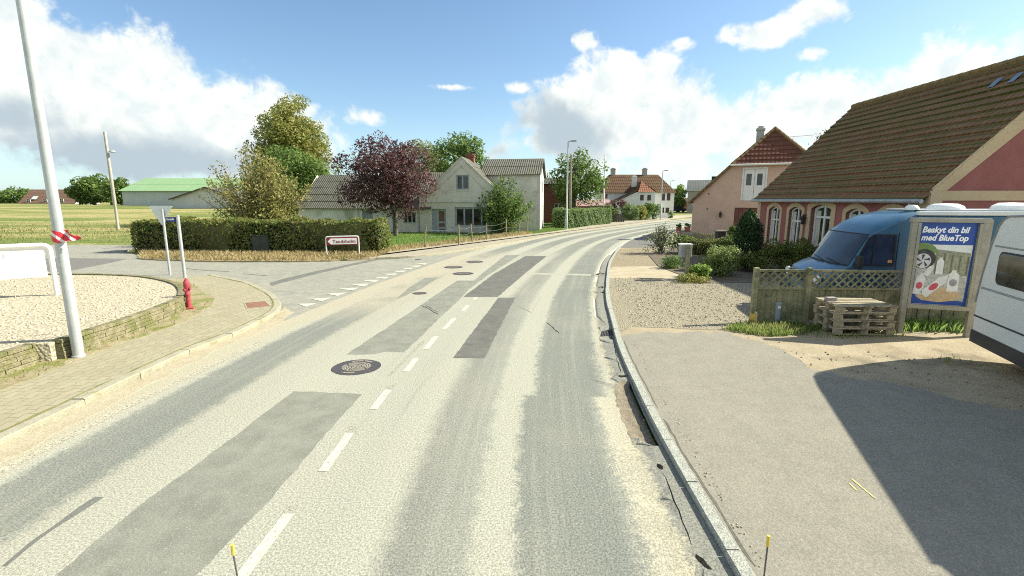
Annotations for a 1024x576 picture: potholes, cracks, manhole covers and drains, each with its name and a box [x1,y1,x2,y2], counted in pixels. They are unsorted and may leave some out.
utility cover [244,301,271,309]
manhole cover [331,359,381,375]
crack [663,474,692,545]
pothole [614,380,656,446]
